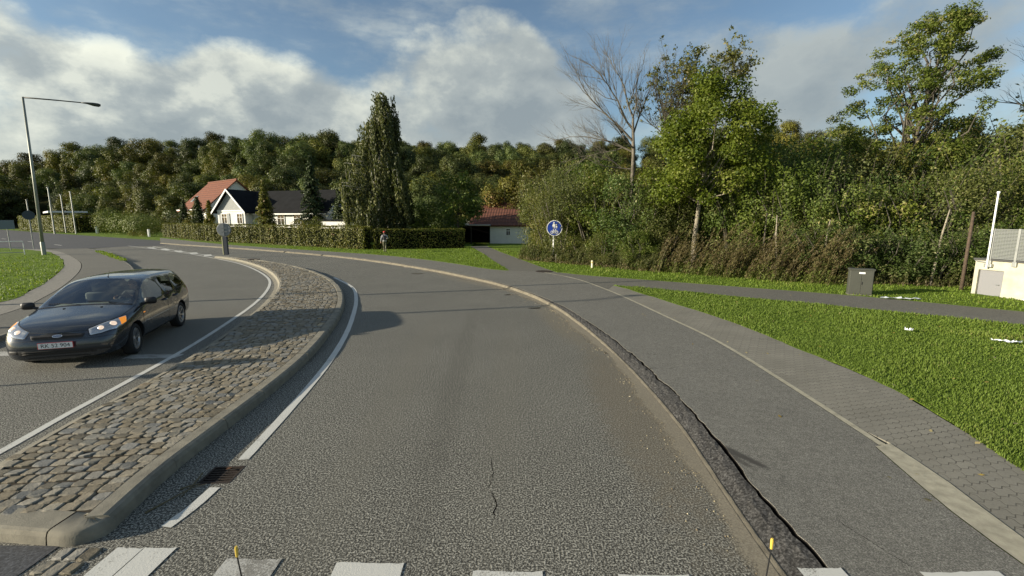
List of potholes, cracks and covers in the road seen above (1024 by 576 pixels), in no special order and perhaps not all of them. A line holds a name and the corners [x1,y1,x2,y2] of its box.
drain grate [197,466,246,484]
crack [405,264,916,569]
